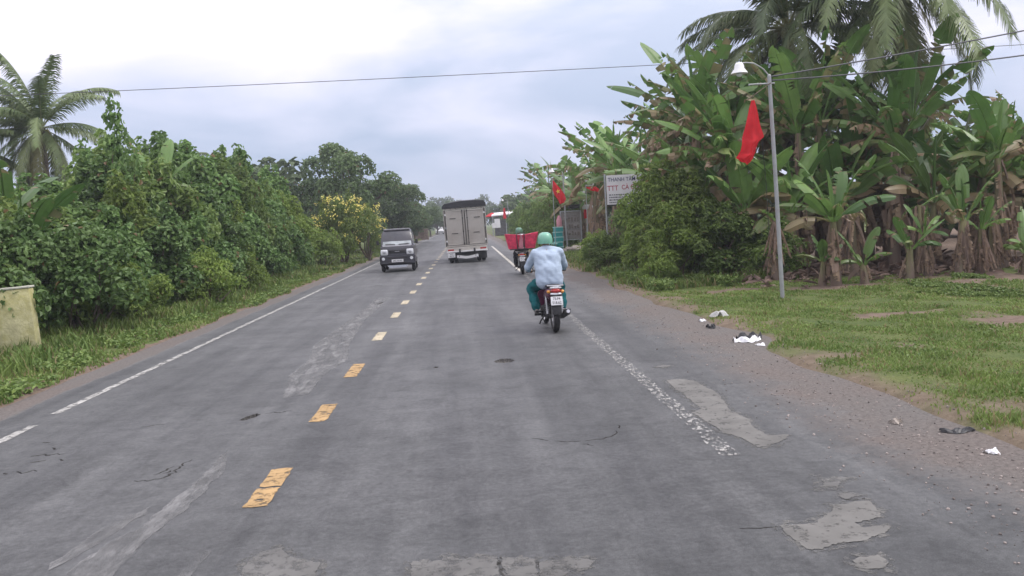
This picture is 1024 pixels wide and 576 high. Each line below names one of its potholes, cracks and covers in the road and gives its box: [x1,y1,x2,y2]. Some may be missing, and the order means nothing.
crack [136,460,191,482]
crack [533,425,620,446]
